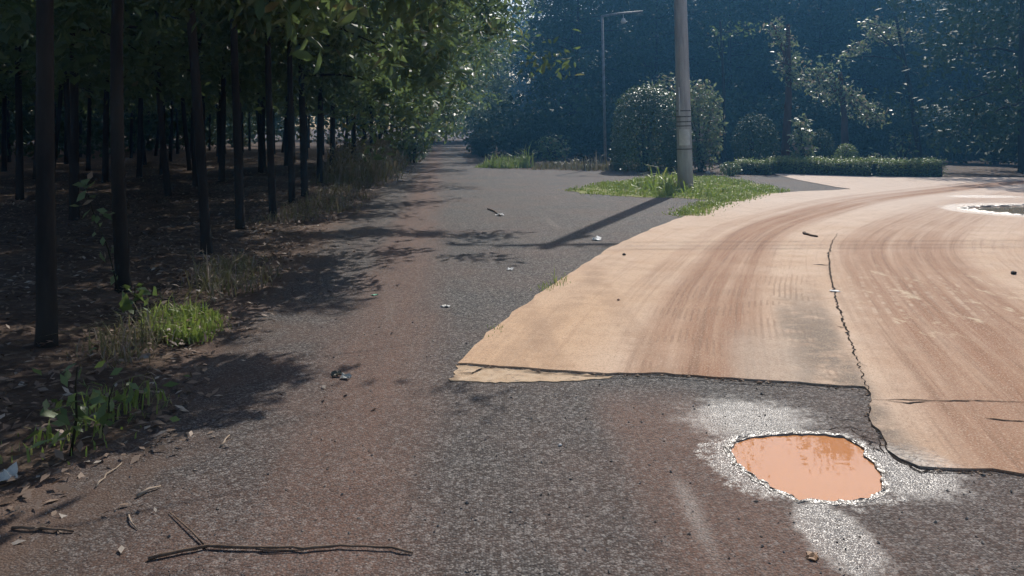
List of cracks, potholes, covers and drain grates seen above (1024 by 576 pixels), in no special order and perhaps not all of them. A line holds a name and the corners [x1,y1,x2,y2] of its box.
crack [803,392,1020,477]
pothole [958,204,1024,215]
pothole [723,431,891,506]
